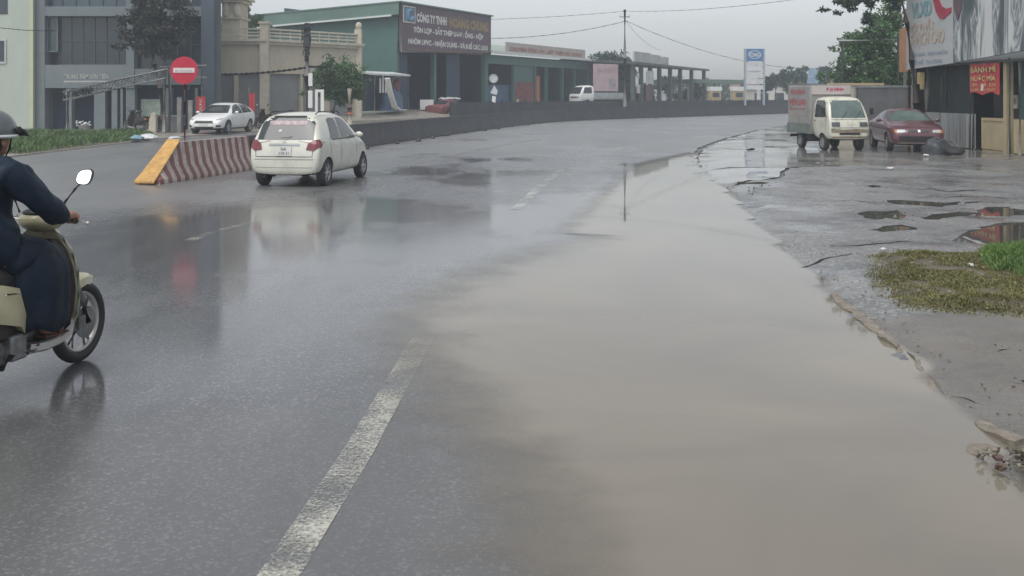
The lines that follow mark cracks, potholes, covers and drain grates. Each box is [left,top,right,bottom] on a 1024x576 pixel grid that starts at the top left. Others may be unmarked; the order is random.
pothole [952,221,1024,244]
crack [804,240,909,268]
pothole [854,210,914,221]
crack [712,166,839,184]
pothole [920,212,978,220]
